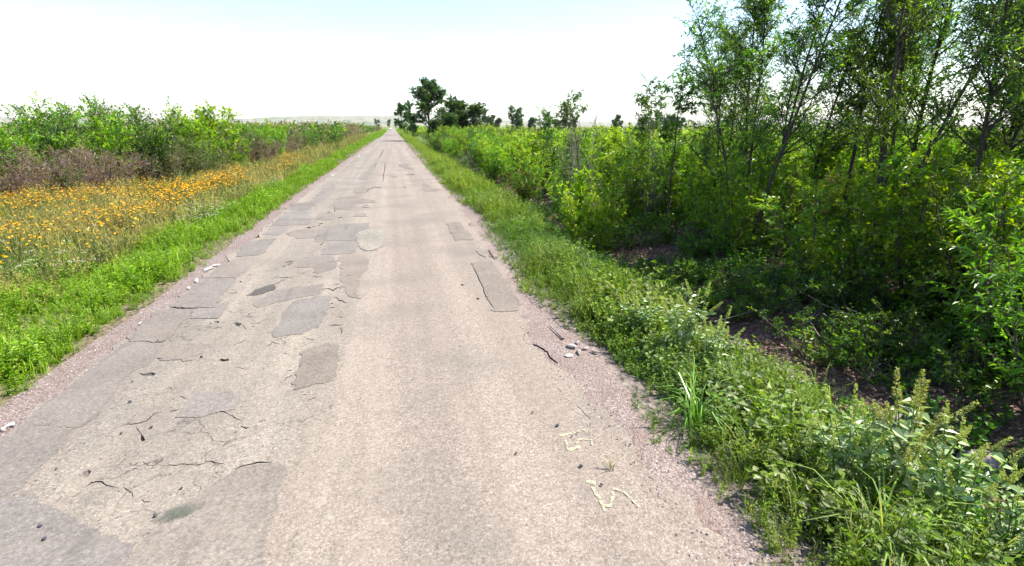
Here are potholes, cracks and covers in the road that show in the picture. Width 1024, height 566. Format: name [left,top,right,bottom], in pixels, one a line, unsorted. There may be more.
crack [86,481,149,502]
crack [121,388,184,441]
crack [131,460,269,478]
